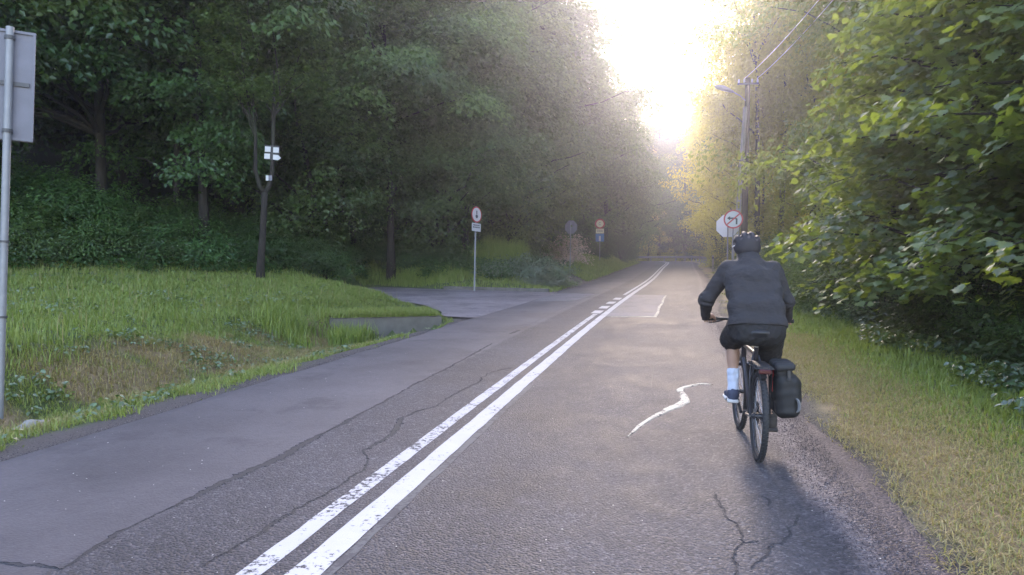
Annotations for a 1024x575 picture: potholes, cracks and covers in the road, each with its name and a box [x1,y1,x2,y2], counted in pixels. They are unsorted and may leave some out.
crack [202,368,508,566]
crack [713,492,800,575]
